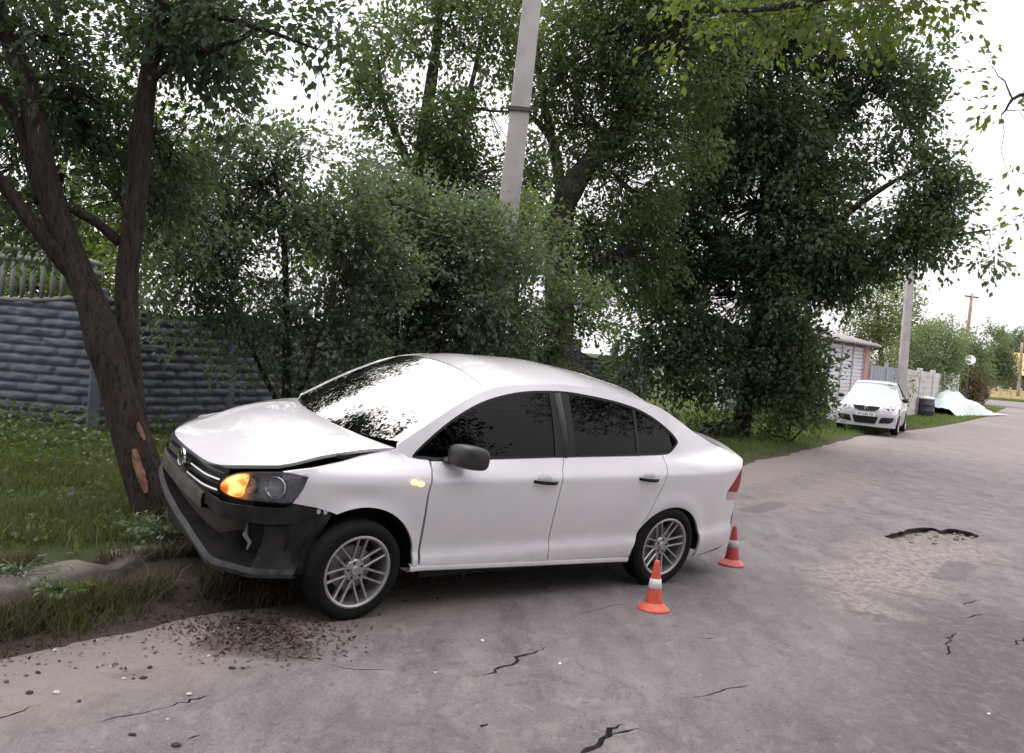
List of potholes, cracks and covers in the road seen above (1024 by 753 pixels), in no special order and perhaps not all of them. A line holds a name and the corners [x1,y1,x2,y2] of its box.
crack [290,657,383,670]
crack [945,600,982,655]
pothole [884,527,979,546]
crack [581,724,639,753]
crack [485,646,547,675]
crack [99,695,210,723]
crack [693,685,749,698]
